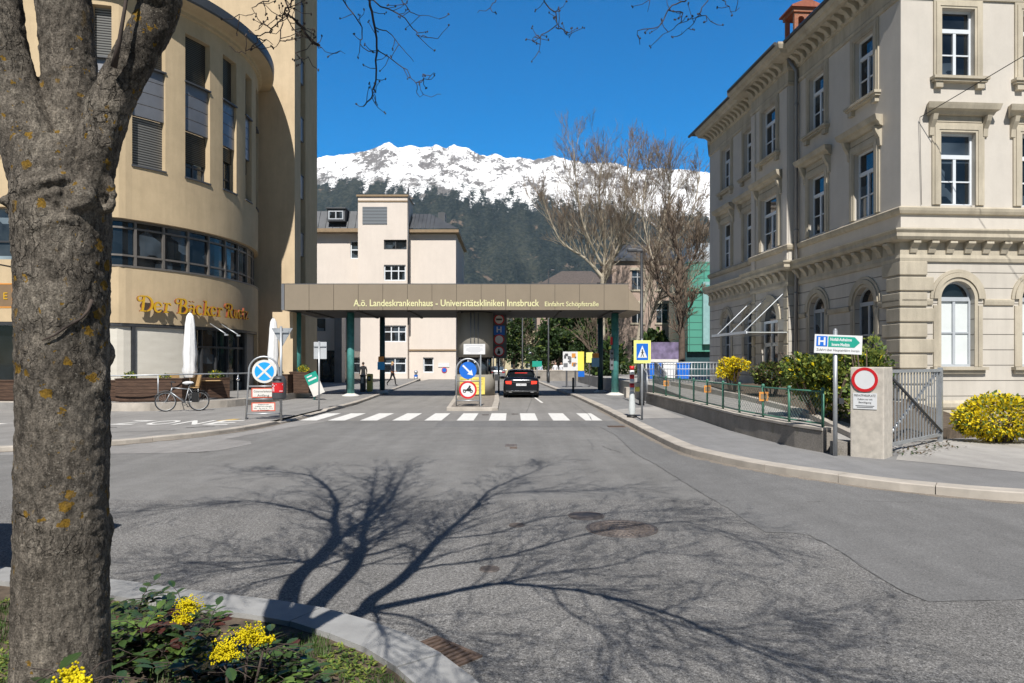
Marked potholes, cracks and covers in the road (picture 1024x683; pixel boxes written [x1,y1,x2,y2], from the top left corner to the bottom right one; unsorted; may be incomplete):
drain grate [420,635,483,667]
manhole cover [586,520,658,538]
